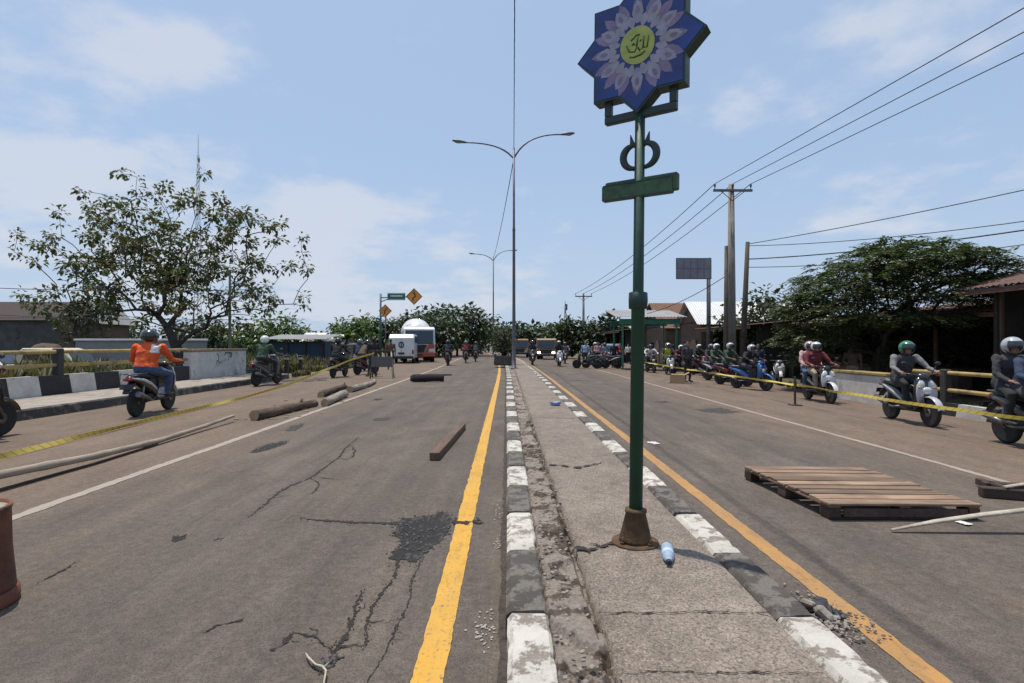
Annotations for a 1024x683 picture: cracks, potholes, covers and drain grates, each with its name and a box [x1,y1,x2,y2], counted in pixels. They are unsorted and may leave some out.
crack [270,554,423,683]
crack [247,437,359,518]
crack [200,617,244,633]
